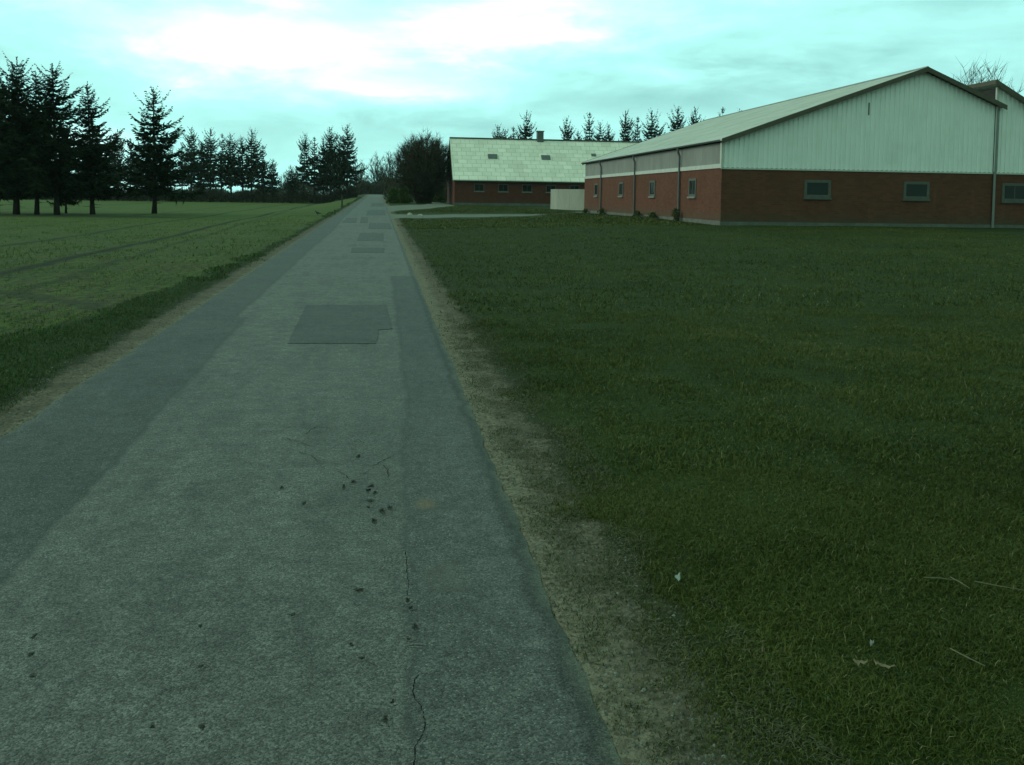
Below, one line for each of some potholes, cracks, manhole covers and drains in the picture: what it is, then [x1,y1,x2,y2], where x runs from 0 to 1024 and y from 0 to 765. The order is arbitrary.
crack [408,674,430,765]
